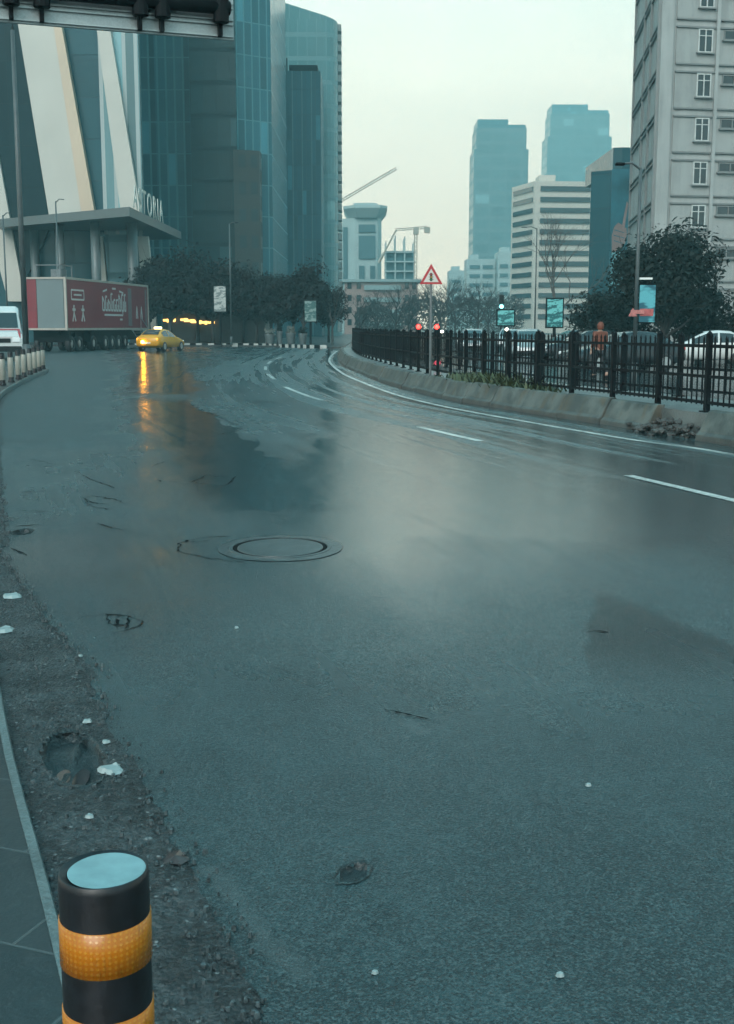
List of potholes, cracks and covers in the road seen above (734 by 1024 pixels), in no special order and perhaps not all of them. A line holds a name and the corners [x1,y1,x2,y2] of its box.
manhole cover [218,535,342,561]
pothole [333,860,373,885]
pothole [36,729,108,789]
crack [83,475,121,529]
